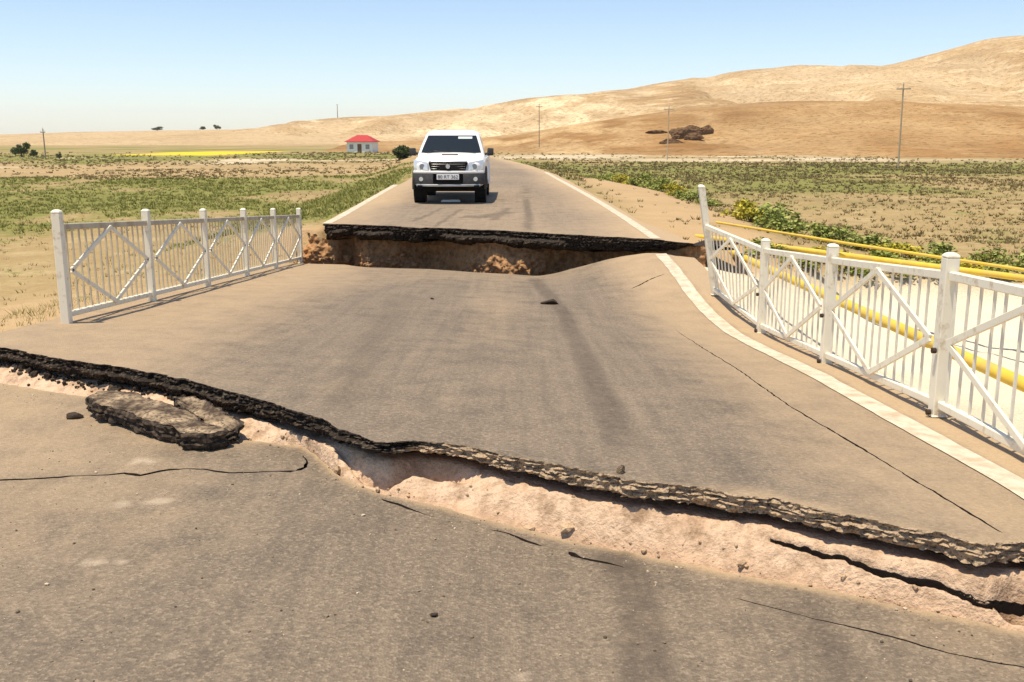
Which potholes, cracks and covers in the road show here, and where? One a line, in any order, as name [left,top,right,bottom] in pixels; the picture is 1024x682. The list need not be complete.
crack [0,330,1024,668]
